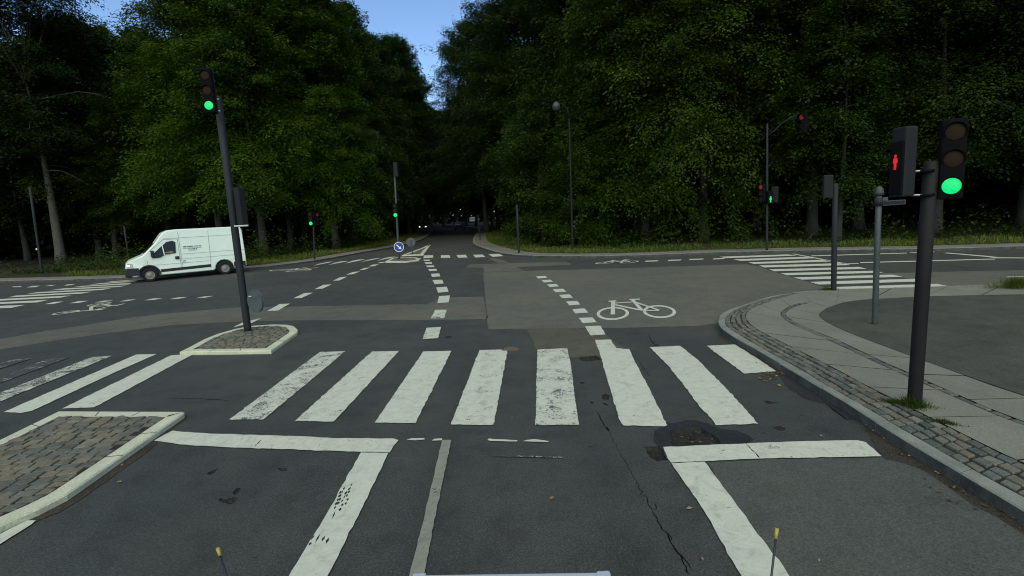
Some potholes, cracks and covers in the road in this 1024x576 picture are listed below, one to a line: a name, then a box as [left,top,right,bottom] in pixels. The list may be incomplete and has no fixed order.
crack [596,411,691,575]
pothole [670,427,721,446]
pothole [644,446,668,461]
